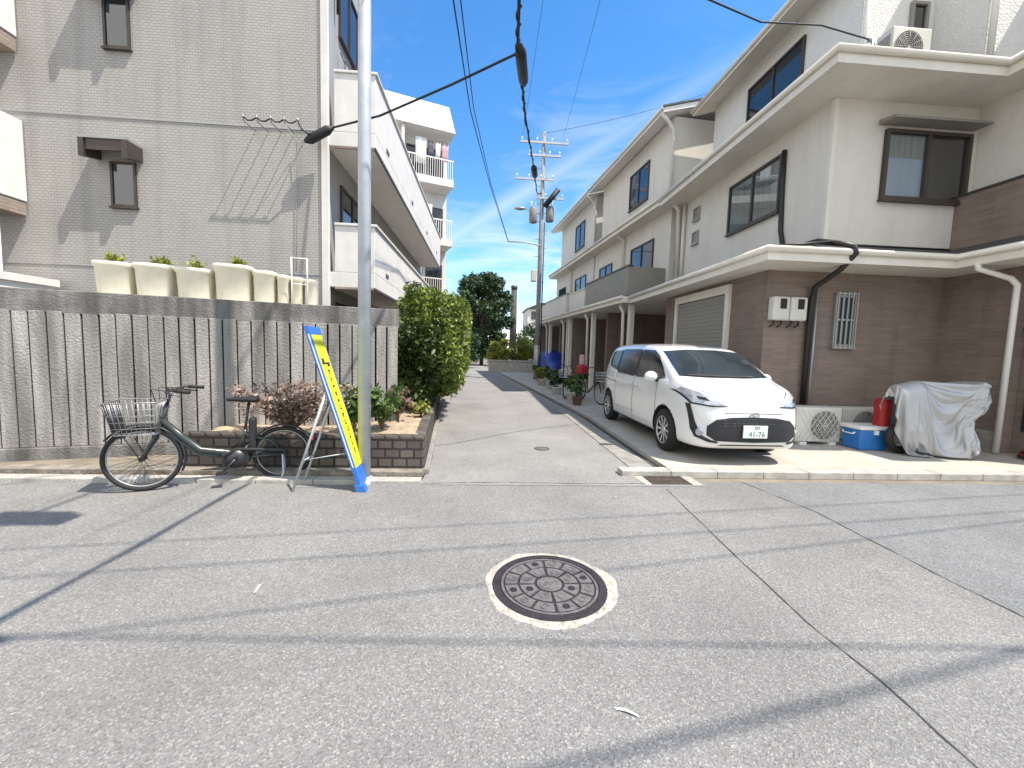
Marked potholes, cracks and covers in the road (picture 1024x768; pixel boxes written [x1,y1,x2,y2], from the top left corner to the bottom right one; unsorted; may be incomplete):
drain grate [633,476,702,486]
manhole cover [485,553,618,630]
